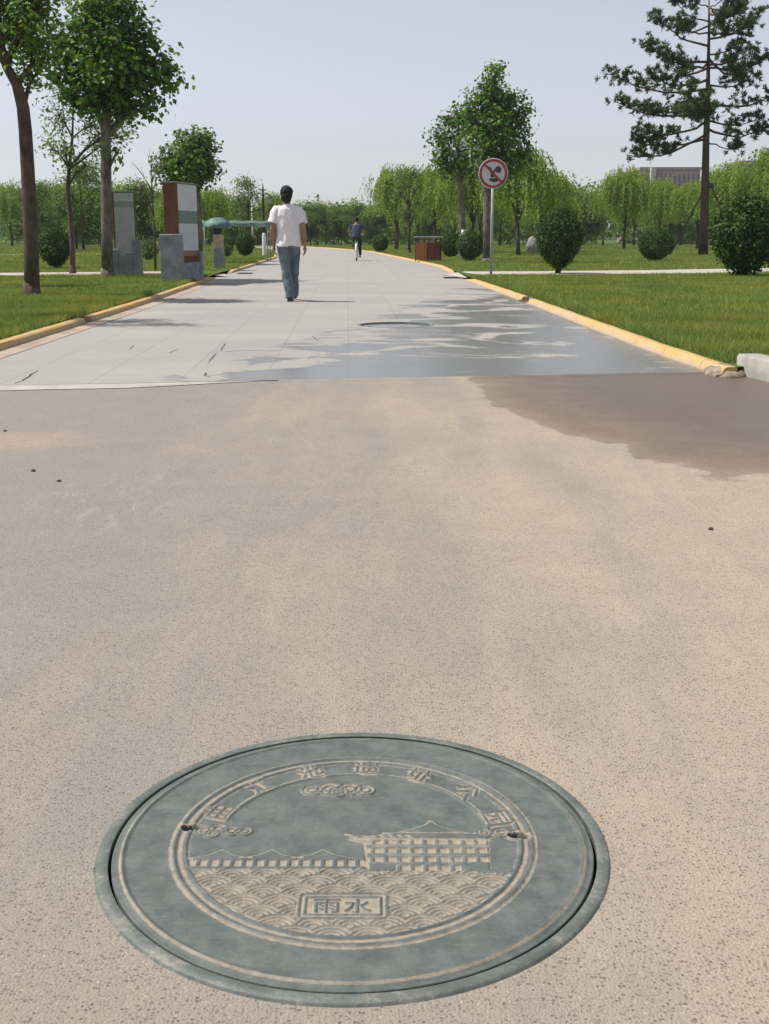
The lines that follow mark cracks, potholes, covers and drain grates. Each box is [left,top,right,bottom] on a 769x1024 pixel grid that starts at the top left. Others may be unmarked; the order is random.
manhole cover [94,733,611,1008]
crack [16,370,39,383]
crack [202,343,280,377]
